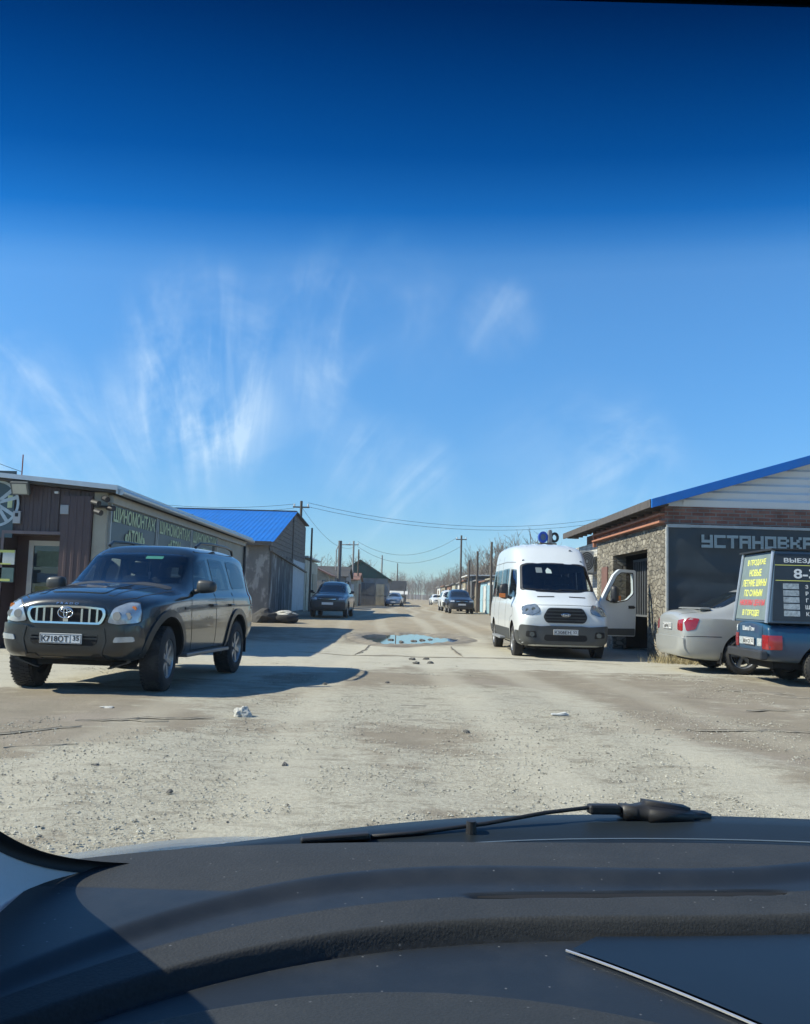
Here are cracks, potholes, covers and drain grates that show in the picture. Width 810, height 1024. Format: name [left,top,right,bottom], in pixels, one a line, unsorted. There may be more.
crack [0,716,214,748]
pothole [346,632,477,648]
